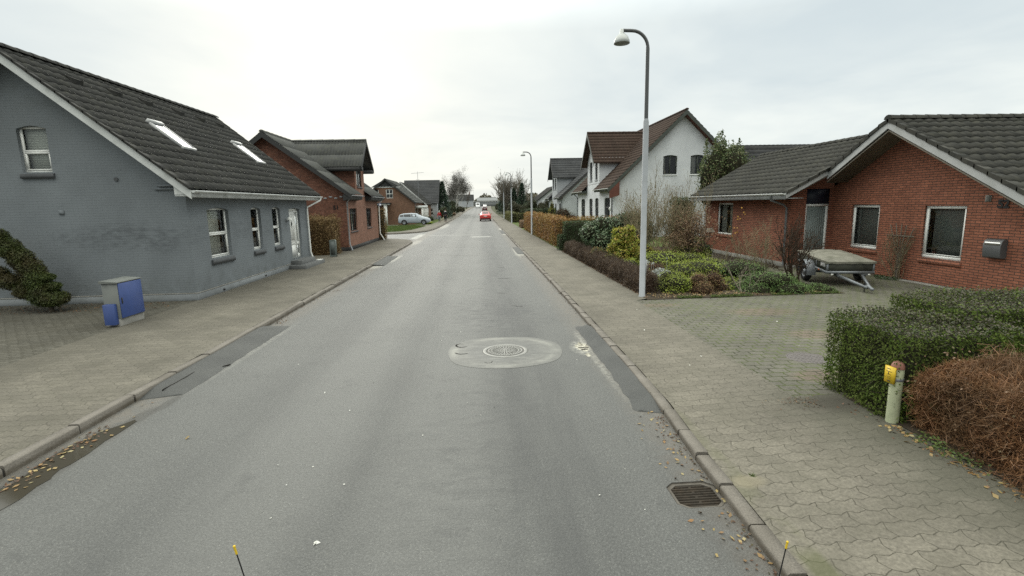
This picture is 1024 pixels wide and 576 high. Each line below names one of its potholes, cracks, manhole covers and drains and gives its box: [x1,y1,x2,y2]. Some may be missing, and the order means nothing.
manhole cover [483,344,528,358]
drain grate [667,481,726,508]
